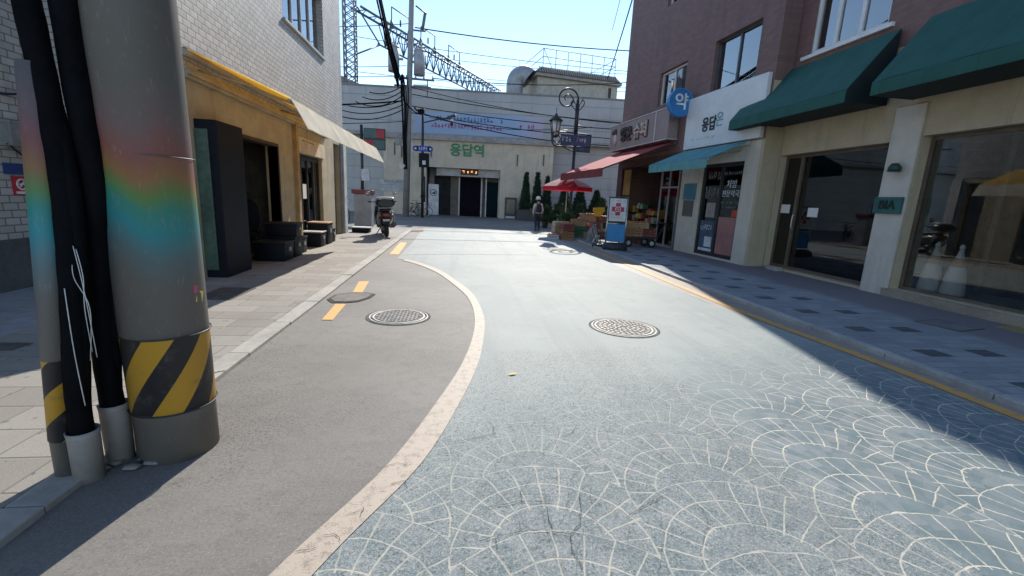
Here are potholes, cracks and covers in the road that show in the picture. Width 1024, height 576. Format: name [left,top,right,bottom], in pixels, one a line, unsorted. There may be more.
crack [459,384,860,576]
manhole cover [365,309,431,325]
manhole cover [589,318,660,338]
